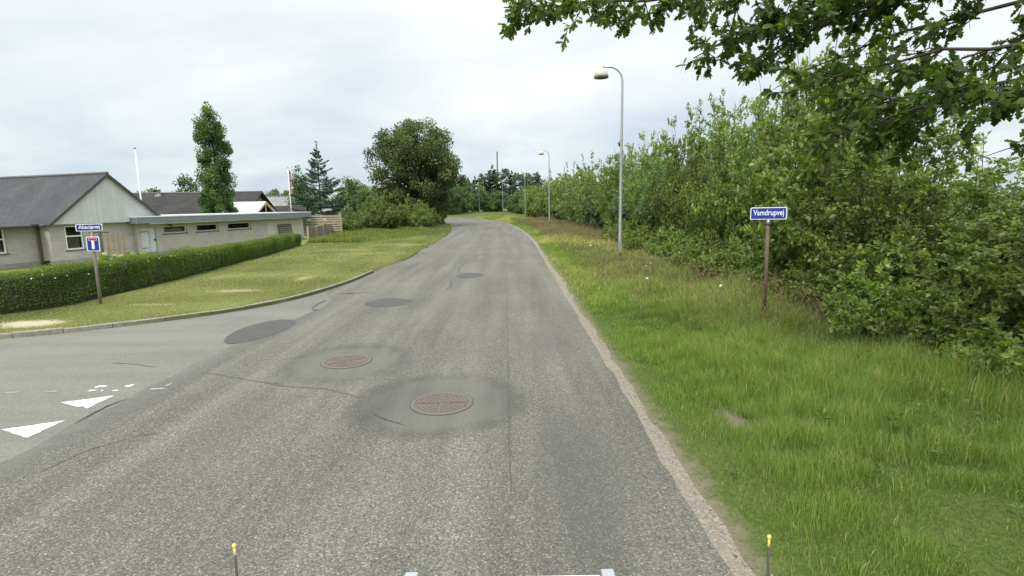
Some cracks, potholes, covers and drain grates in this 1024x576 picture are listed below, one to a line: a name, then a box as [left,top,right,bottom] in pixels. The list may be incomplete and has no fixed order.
manhole cover [320,354,372,369]
crack [38,433,157,473]
manhole cover [409,392,474,415]
crack [202,372,353,396]
